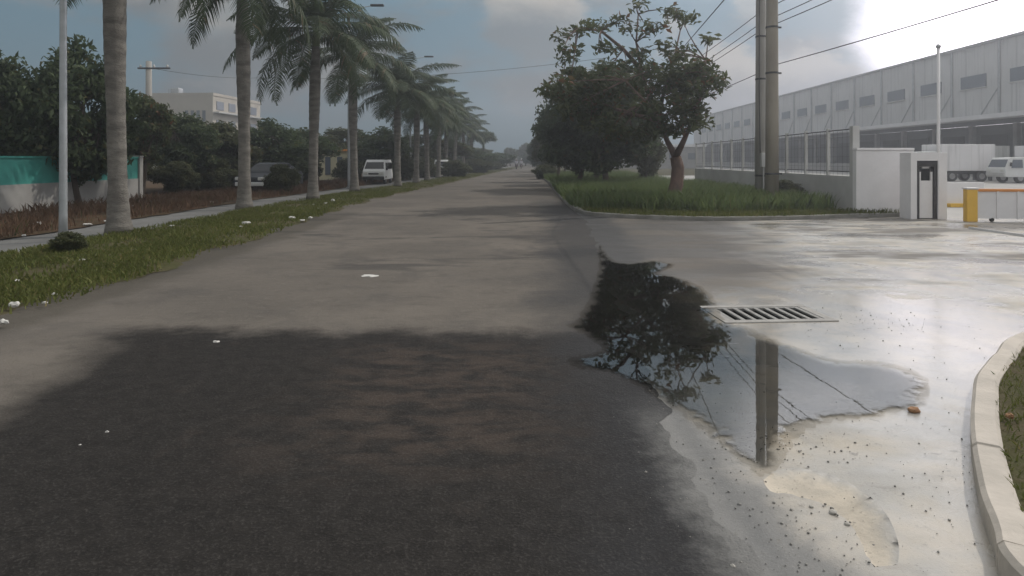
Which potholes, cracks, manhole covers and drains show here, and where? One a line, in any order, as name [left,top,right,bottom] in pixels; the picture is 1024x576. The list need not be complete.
drain grate [699,304,839,324]
